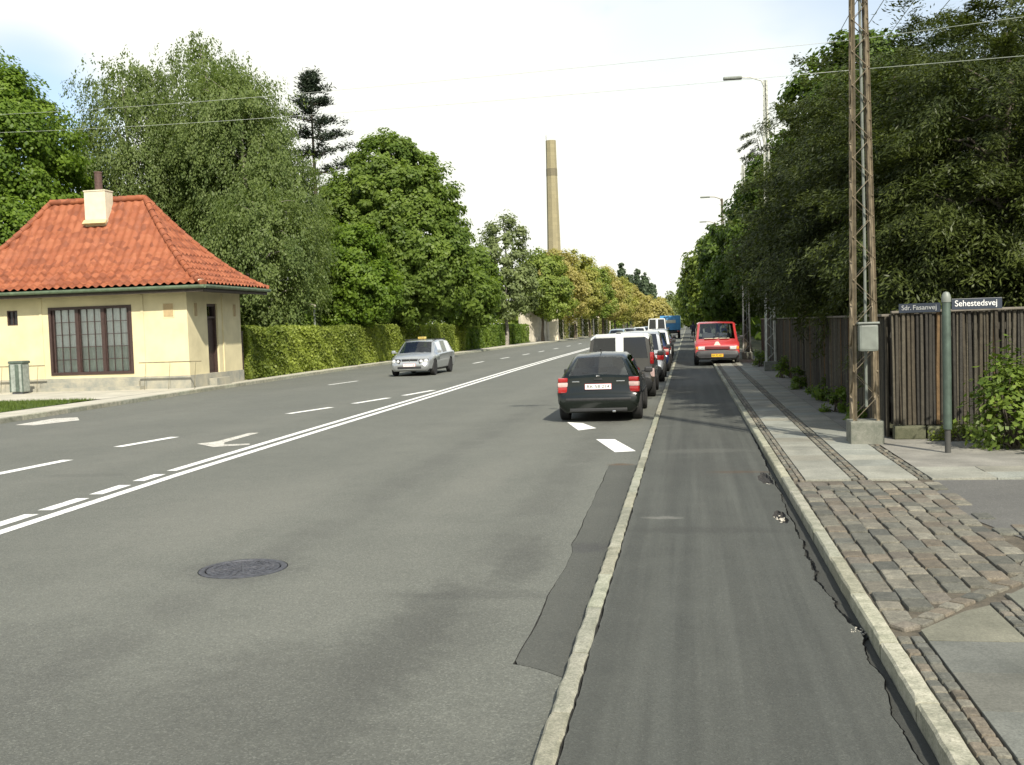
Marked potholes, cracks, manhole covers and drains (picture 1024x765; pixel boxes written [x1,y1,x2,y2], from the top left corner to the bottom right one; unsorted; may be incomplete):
pothole [773,510,789,523]
pothole [757,472,774,485]
crack [752,434,924,765]
manhole cover [198,559,287,579]
